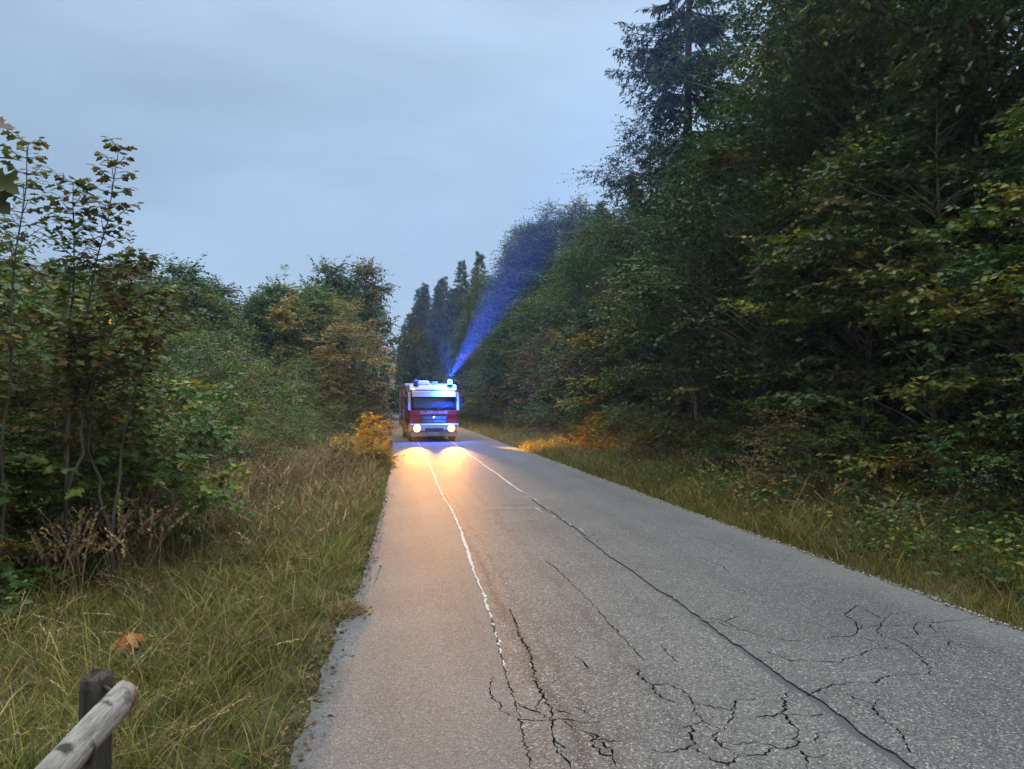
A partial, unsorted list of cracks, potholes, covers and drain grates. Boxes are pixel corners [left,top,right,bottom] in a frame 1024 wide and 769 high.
crack [490,610,620,769]
crack [808,605,974,752]
crack [546,561,826,767]
